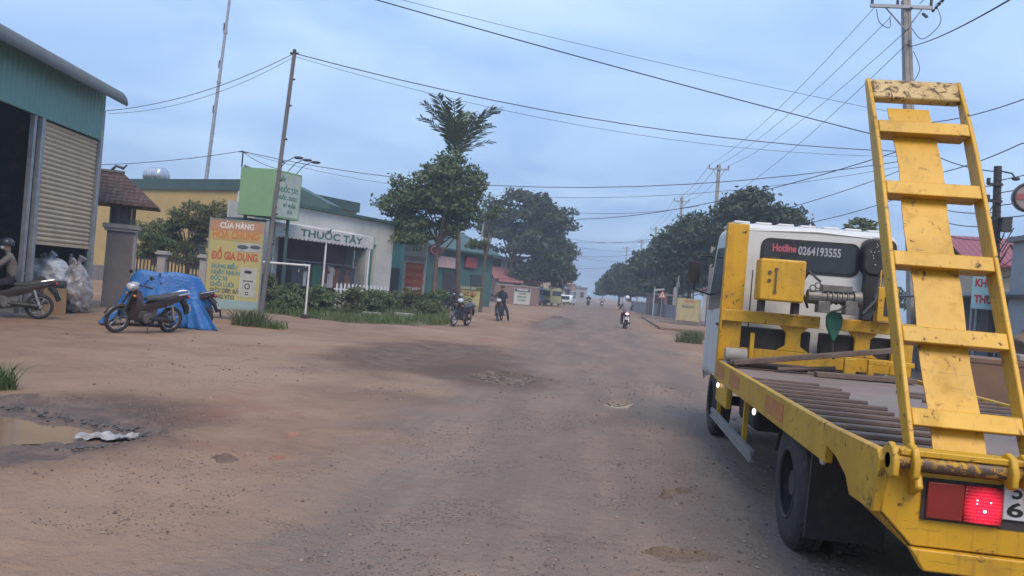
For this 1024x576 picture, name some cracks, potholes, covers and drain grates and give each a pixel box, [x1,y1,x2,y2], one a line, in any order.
pothole [640,546,726,563]
pothole [603,399,633,408]
pothole [467,370,535,386]
pothole [0,393,169,468]
pothole [658,487,693,499]
pothole [210,452,239,464]
